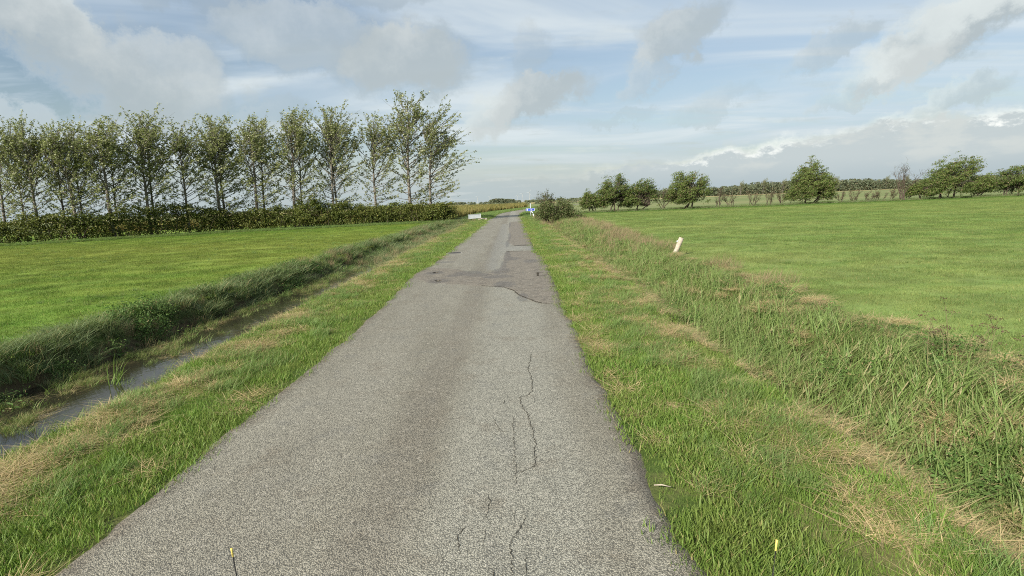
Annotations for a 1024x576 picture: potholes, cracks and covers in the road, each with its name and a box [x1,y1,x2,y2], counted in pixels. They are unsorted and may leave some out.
crack [472,356,537,482]
crack [493,513,527,576]
